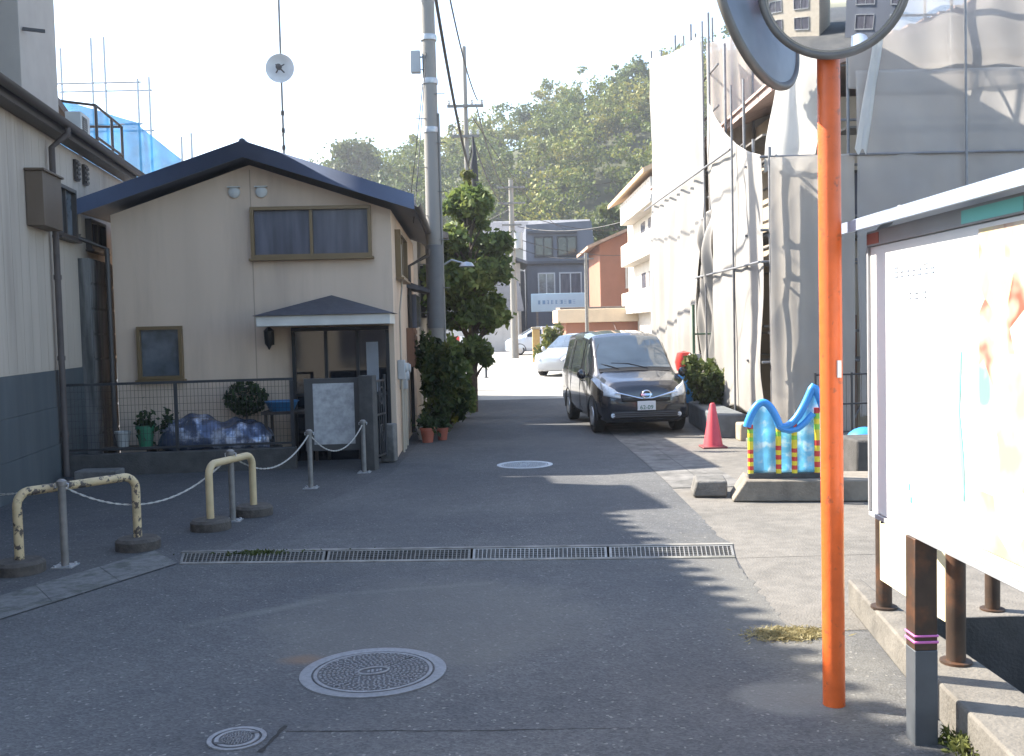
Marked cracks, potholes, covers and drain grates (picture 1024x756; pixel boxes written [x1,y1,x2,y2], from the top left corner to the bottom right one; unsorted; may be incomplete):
manhole cover [207,726,267,751]
drain grate [472,547,607,559]
manhole cover [299,648,446,699]
drain grate [180,551,326,563]
drain grate [326,549,471,560]
drain grate [609,545,735,557]
manhole cover [497,461,553,469]
